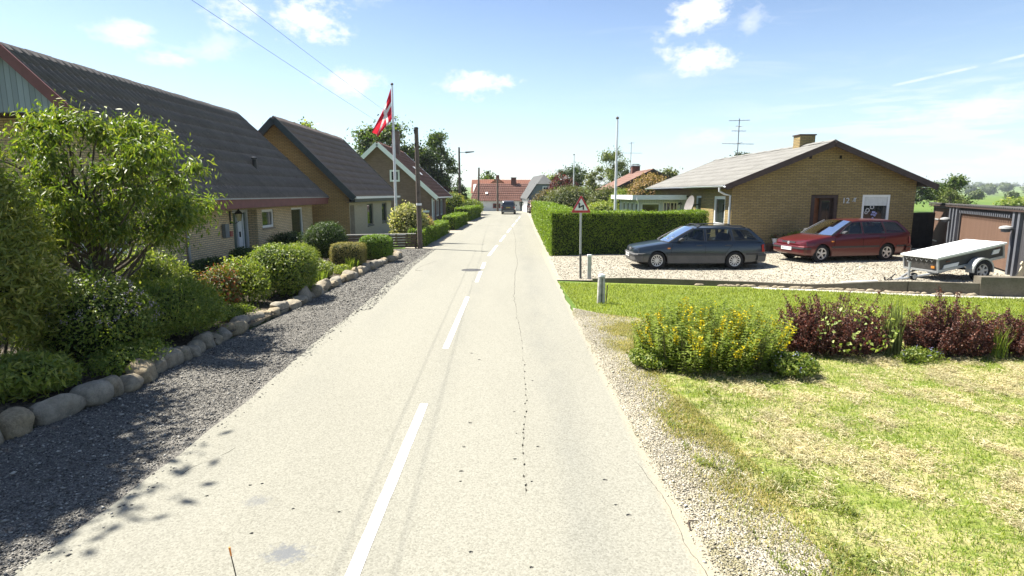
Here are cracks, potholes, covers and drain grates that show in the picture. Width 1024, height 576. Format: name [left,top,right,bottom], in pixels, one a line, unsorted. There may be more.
crack [513,249,528,491]
